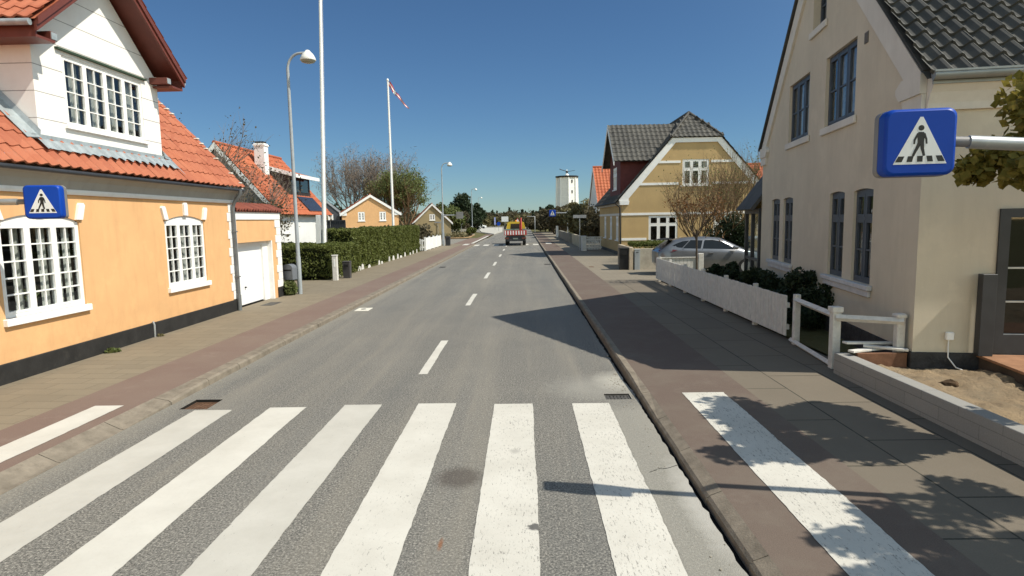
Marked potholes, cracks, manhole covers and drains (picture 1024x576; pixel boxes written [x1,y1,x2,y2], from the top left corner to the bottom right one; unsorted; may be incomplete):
drain grate [181,399,223,409]
